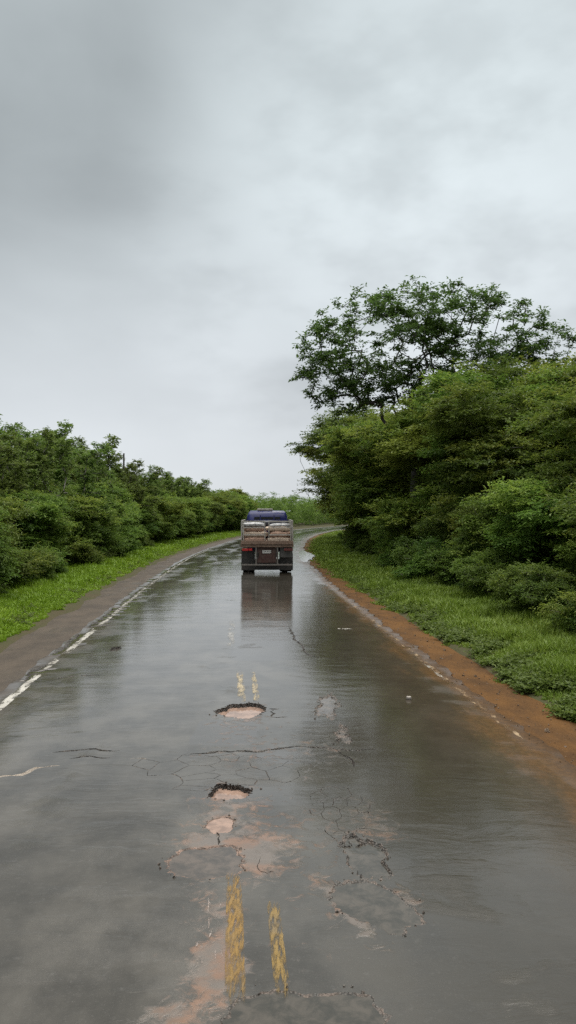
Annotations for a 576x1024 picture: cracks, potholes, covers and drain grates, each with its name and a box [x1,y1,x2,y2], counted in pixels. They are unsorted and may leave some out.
crack [0,746,377,791]
pothole [204,814,236,835]
pothole [206,781,262,801]
pothole [312,692,342,720]
crack [308,786,373,842]
pothole [209,702,267,719]
crack [289,627,331,659]
